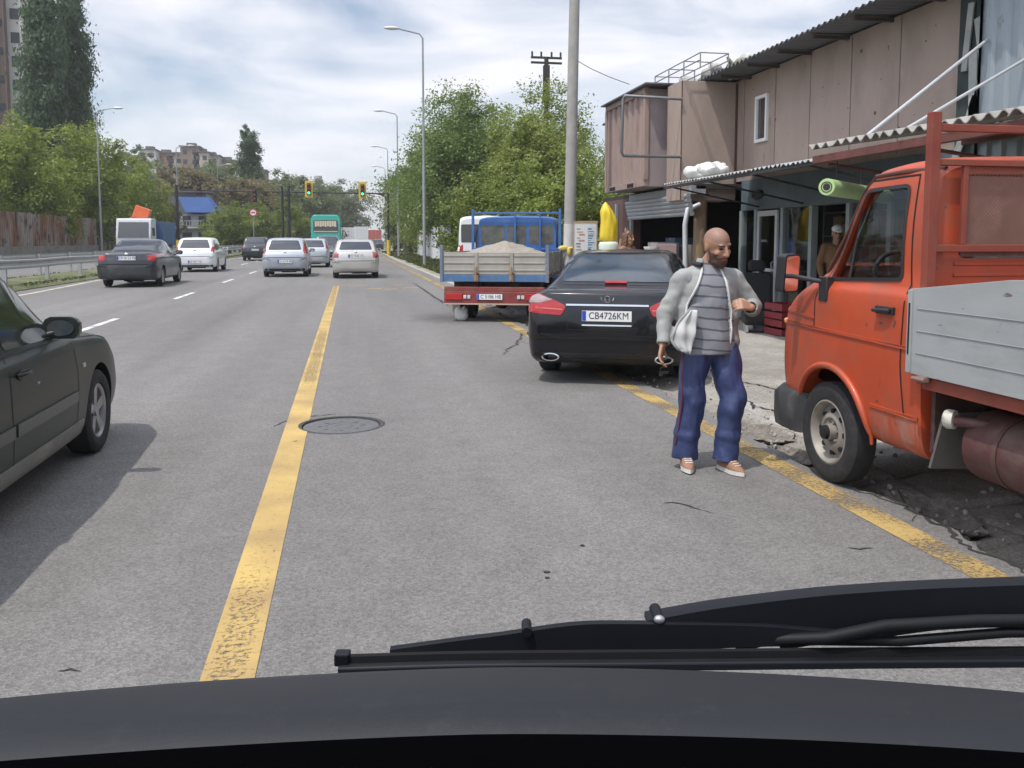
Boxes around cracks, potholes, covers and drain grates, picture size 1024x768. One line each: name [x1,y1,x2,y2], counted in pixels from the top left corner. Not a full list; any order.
pothole [878,489,990,537]
manhole cover [298,416,384,434]
crack [854,490,1024,573]
